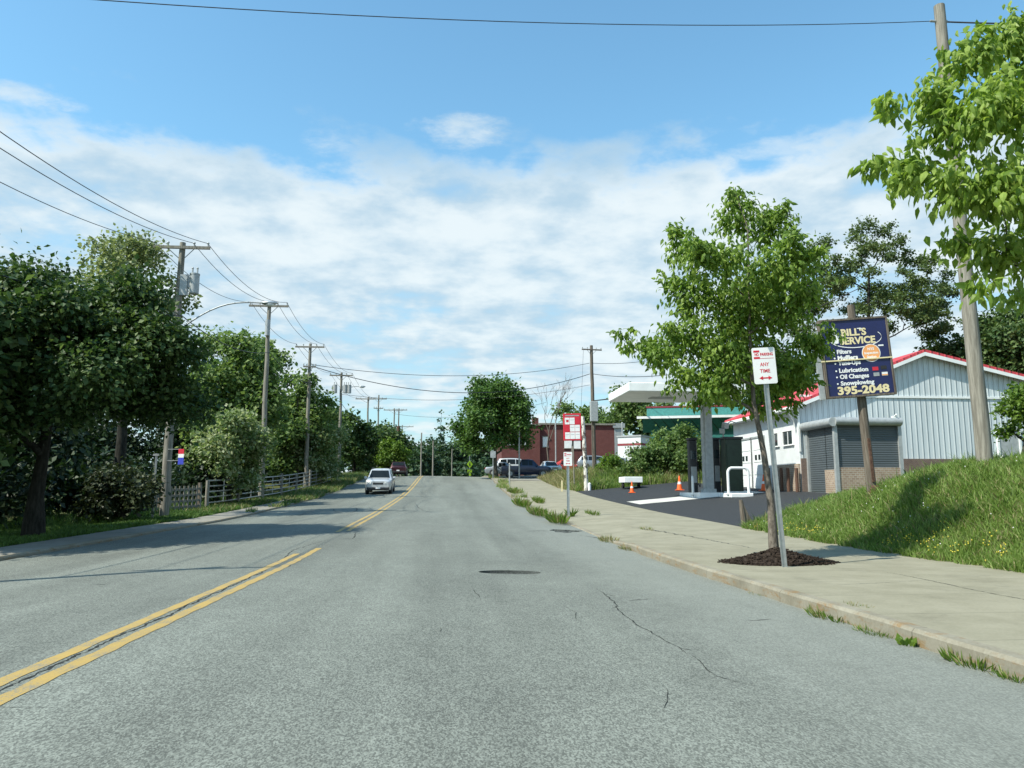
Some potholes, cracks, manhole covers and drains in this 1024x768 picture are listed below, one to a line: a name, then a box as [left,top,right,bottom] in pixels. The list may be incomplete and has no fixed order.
crack [597,589,761,687]
